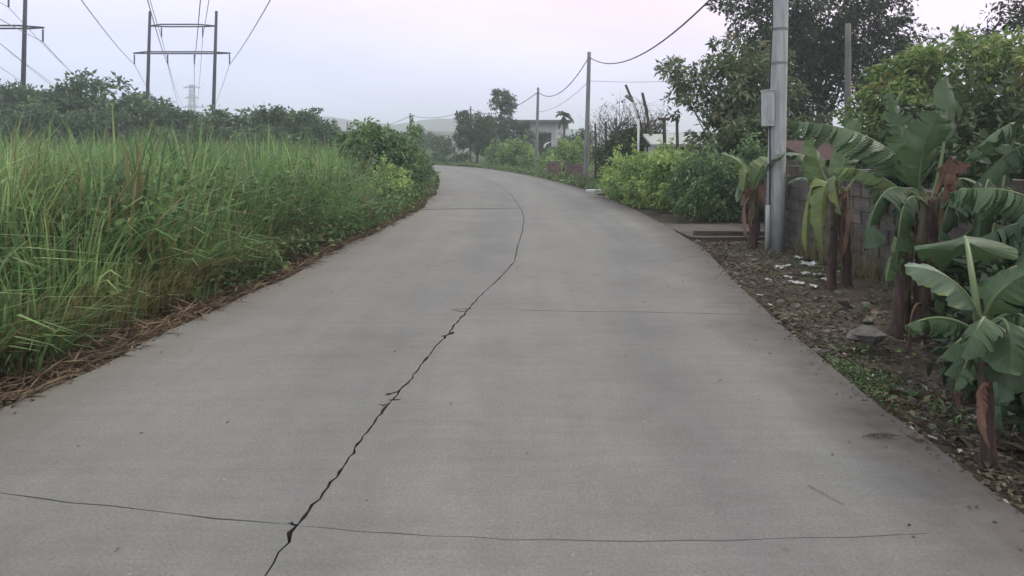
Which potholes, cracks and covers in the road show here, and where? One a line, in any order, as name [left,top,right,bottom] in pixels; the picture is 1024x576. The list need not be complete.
crack [3,188,926,576]
